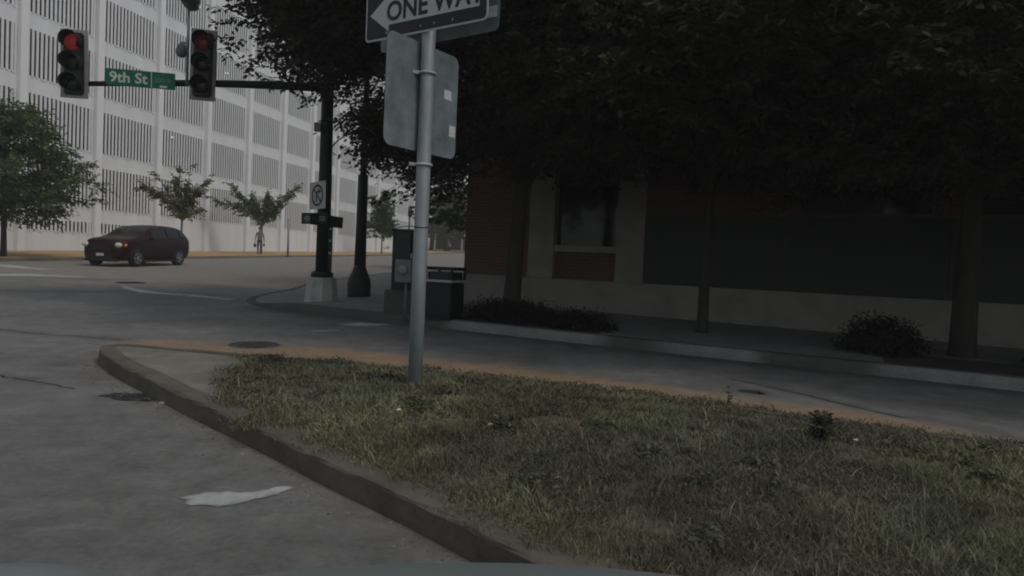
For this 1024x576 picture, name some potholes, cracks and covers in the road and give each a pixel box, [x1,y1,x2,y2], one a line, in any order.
crack [0,329,123,340]
manhole cover [228,341,281,349]
pothole [98,393,155,401]
crack [0,375,74,389]
